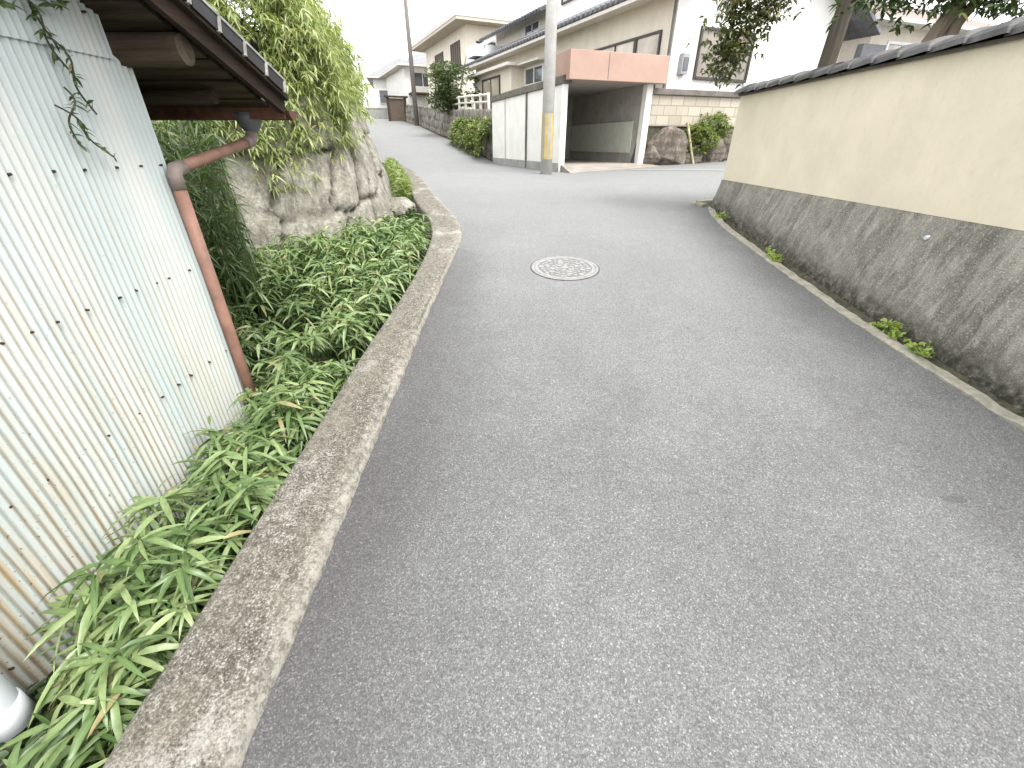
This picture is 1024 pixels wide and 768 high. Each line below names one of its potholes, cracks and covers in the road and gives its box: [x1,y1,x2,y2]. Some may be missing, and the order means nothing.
manhole cover [530,256,600,281]
